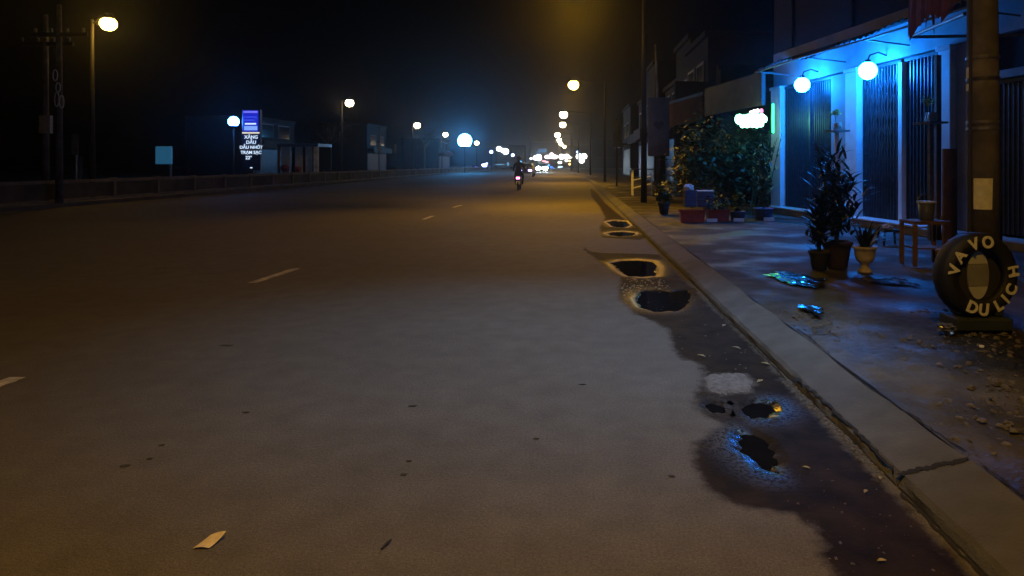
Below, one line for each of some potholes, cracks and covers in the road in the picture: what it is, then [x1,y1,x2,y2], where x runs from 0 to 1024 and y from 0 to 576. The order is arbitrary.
pothole [690,396,741,417]
pothole [601,219,633,228]
pothole [723,395,793,423]
pothole [715,423,801,481]
pothole [600,258,670,279]
pothole [623,287,703,314]
